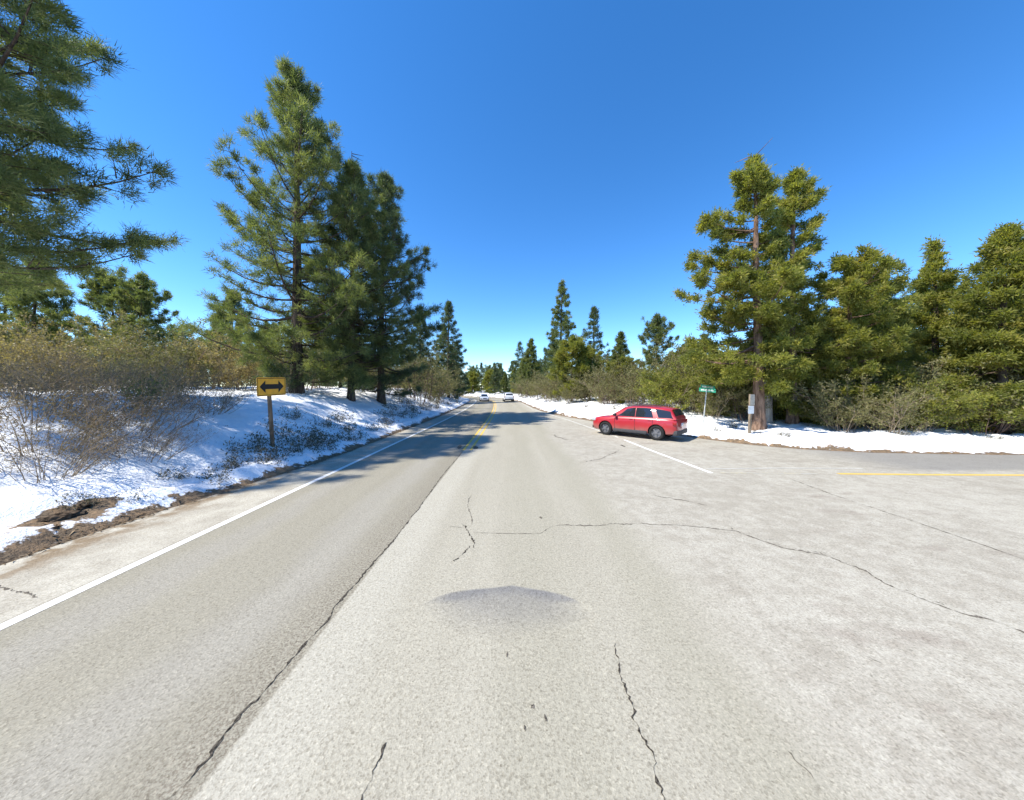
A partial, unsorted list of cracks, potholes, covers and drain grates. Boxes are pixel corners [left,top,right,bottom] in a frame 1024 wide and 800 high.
crack [361,743,386,800]
crack [0,585,38,598]
crack [451,496,475,562]
crack [614,645,665,800]
crack [565,523,1024,633]
